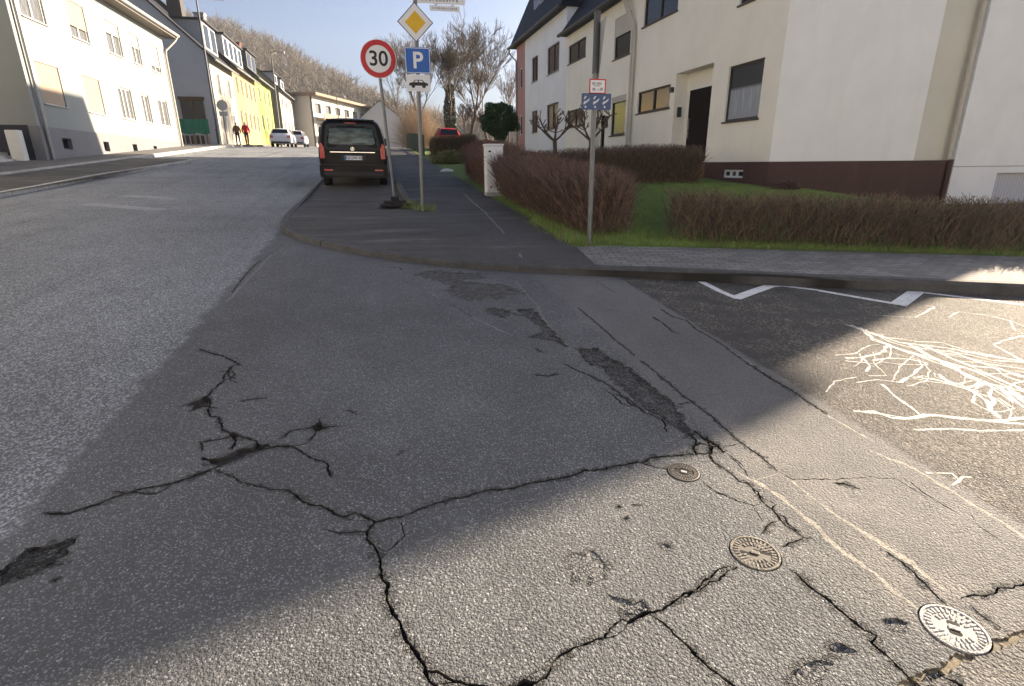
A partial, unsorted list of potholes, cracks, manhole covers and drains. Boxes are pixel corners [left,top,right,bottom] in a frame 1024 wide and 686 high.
manhole cover [667,463,701,482]
pothole [0,534,80,587]
crack [42,308,998,686]
manhole cover [917,604,994,656]
manhole cover [729,536,782,572]
